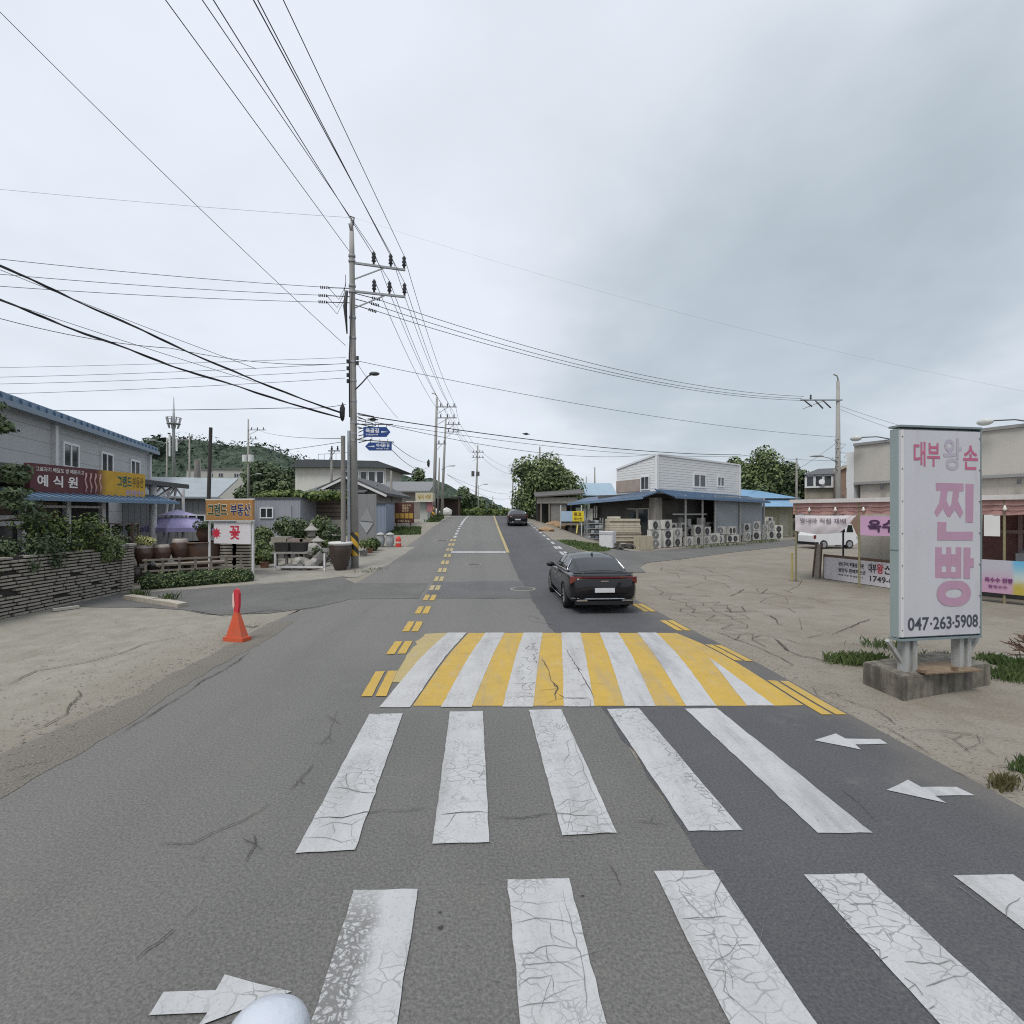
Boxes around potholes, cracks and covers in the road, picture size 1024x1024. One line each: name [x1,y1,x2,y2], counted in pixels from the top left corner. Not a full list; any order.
crack [20,690,81,735]
crack [176,803,270,860]
crack [118,652,249,735]
crack [137,906,197,958]
crack [521,643,604,707]
crack [652,566,869,665]
